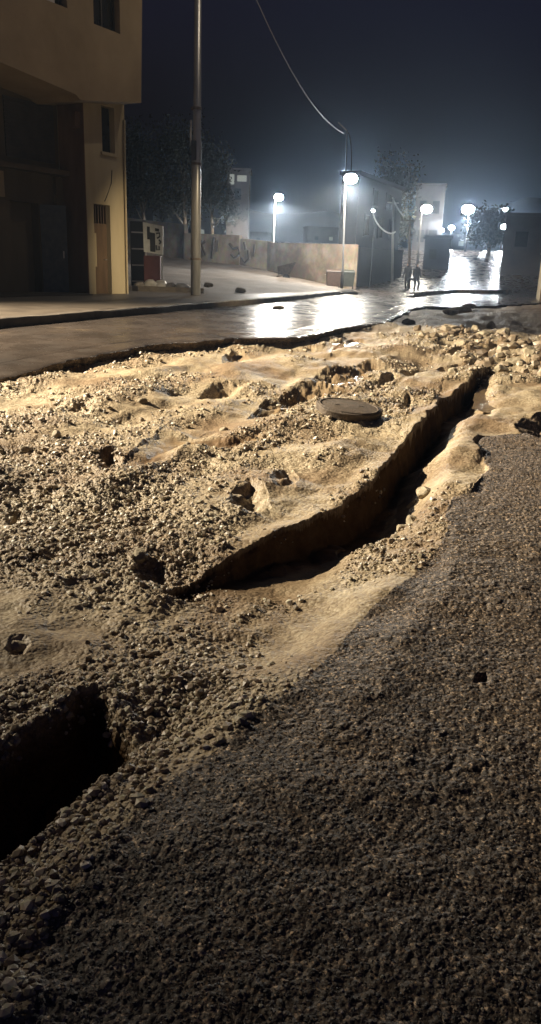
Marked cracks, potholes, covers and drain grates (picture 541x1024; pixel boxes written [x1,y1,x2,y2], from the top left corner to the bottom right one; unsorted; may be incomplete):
pothole [97,445,122,470]
pothole [0,683,139,863]
manhole cover [316,397,383,421]
pothole [165,367,505,631]
pothole [130,558,176,587]
pothole [472,671,492,690]
